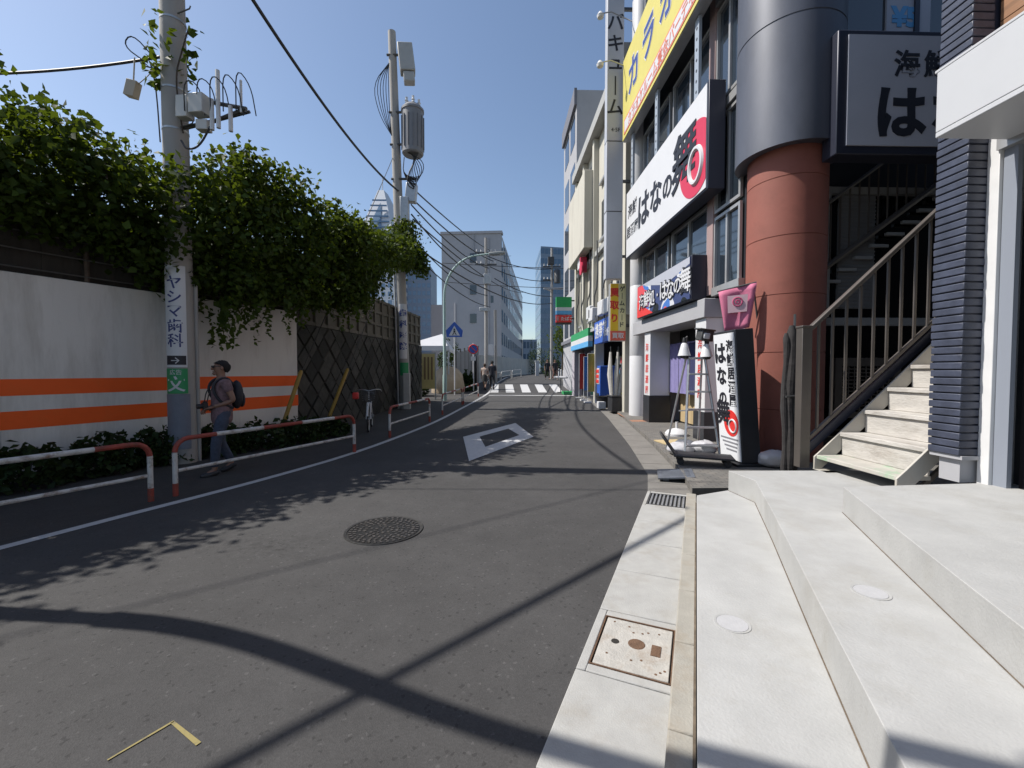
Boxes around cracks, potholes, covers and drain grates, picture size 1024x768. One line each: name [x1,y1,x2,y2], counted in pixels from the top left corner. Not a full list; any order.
manhole cover [343,516,423,546]
manhole cover [588,615,675,686]
drain grate [646,493,686,508]
